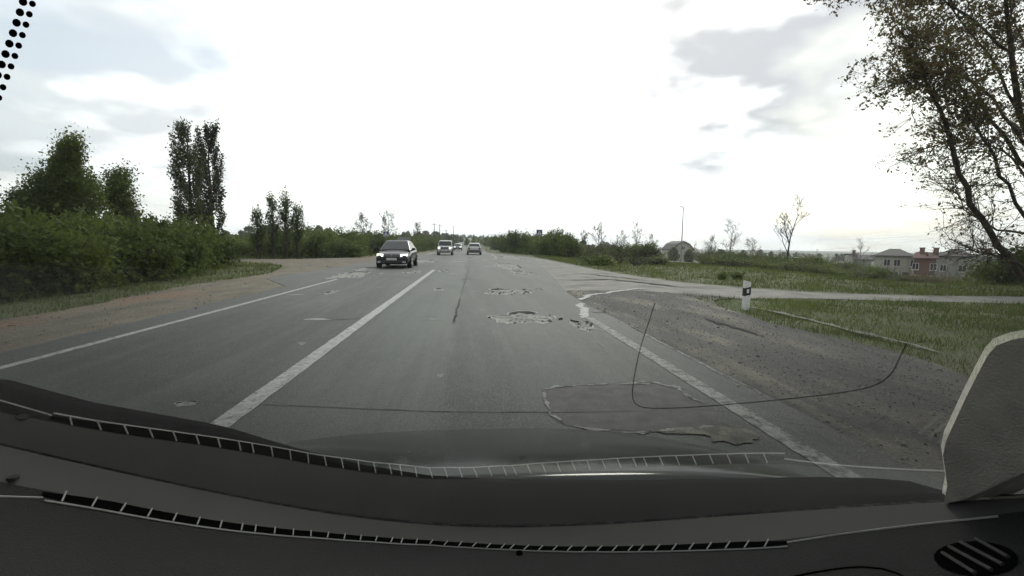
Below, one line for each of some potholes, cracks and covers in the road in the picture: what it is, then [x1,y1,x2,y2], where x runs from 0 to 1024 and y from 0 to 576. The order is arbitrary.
pothole [569,319,594,332]
pothole [487,311,563,324]
